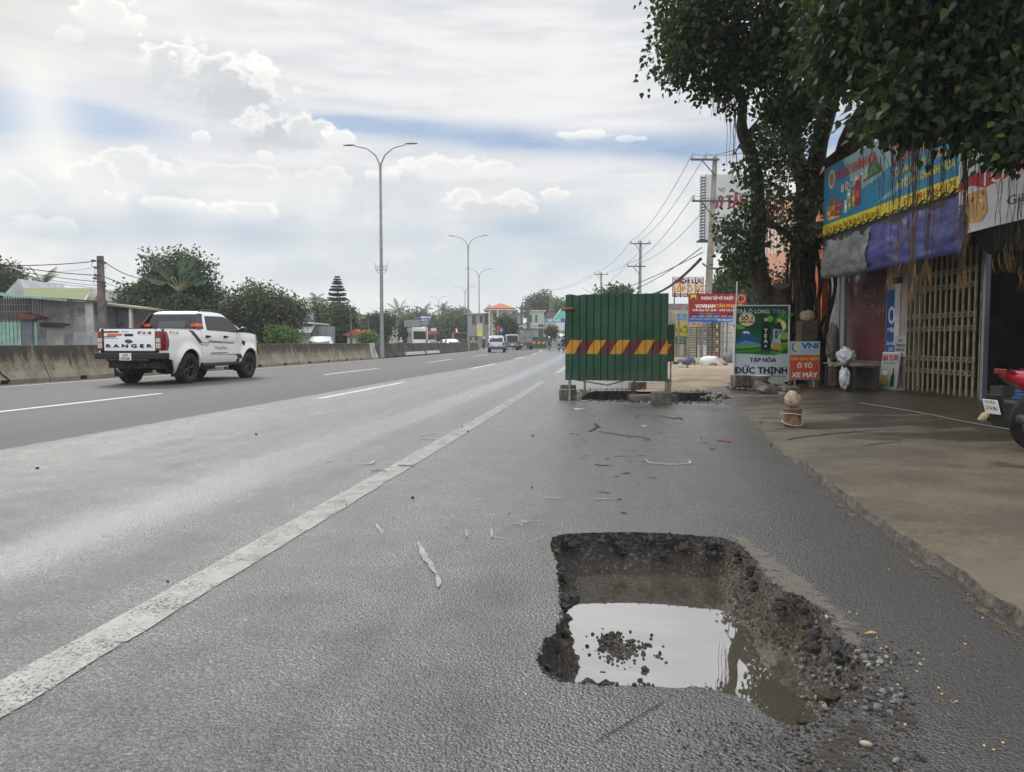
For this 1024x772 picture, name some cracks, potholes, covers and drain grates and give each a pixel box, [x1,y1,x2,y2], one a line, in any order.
pothole [575,388,734,404]
pothole [536,531,922,727]
